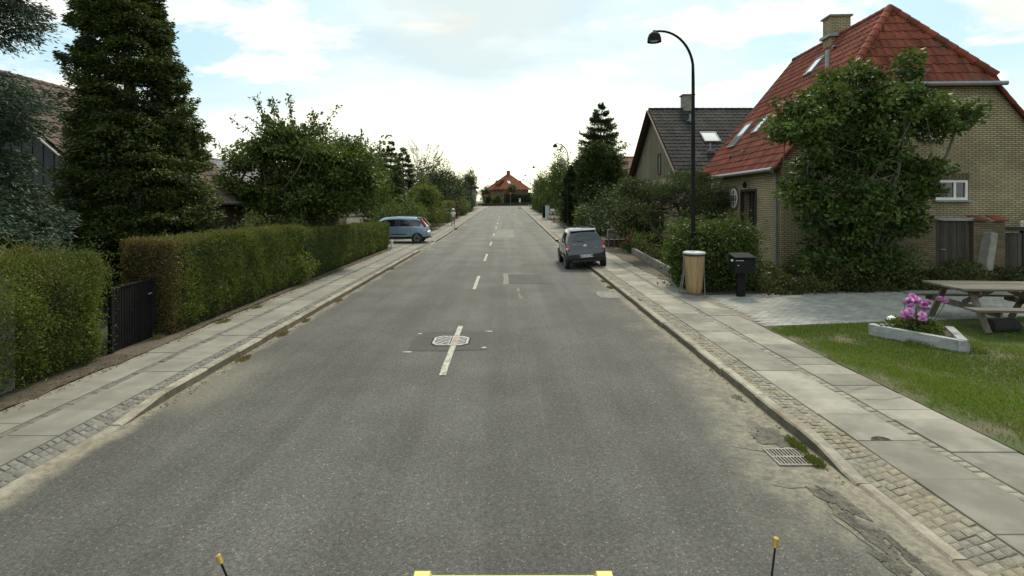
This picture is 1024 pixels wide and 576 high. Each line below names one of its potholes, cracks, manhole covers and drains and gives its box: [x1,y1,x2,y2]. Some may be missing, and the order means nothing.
drain grate [762,448,815,466]
manhole cover [430,336,471,346]
